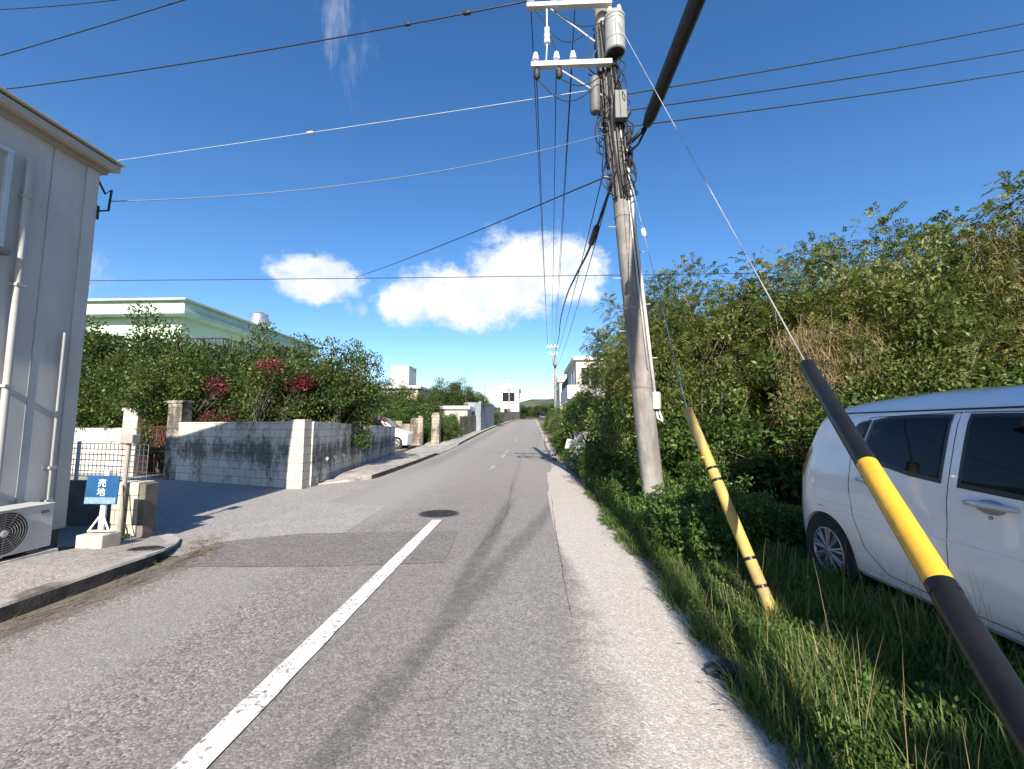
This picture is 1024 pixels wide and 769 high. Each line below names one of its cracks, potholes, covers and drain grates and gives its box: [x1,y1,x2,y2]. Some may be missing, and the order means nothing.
manhole cover [418,509,460,519]
